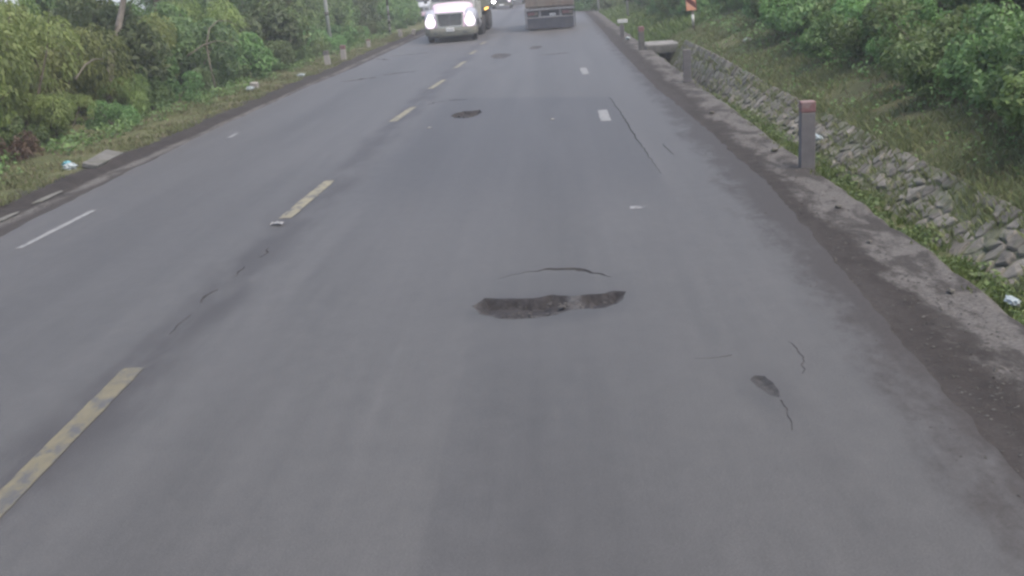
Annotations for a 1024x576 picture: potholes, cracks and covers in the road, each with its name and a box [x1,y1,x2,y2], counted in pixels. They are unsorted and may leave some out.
pothole [451,110,482,118]
crack [503,268,610,278]
pothole [750,375,780,398]
pothole [472,291,627,320]
crack [169,248,269,335]
crack [609,97,674,172]
